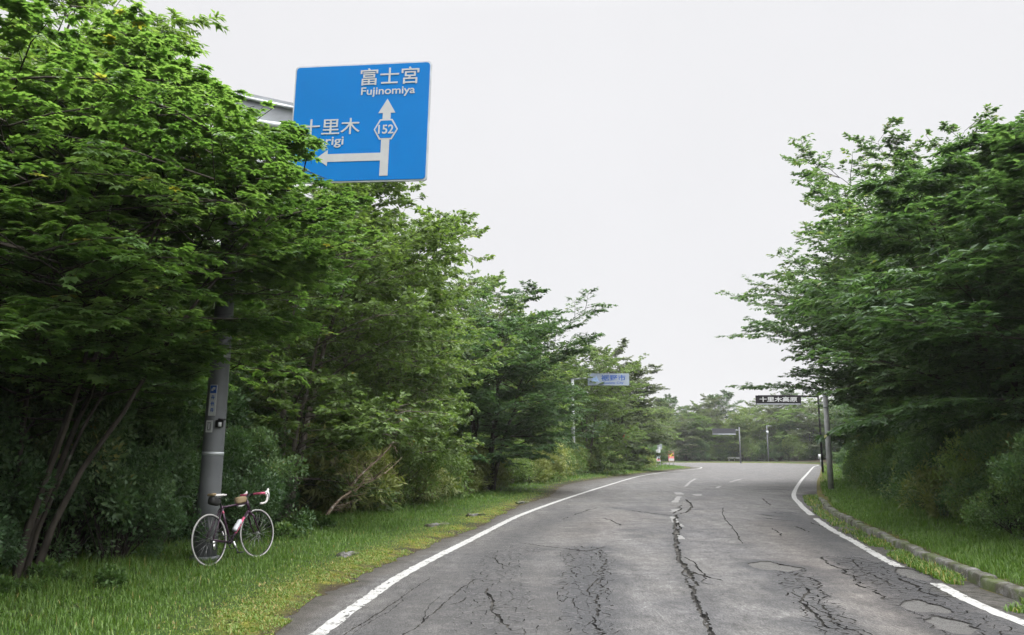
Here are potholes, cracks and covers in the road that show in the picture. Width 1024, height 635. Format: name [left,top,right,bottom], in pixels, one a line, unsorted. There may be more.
crack [343,543,655,635]
crack [563,499,748,635]
crack [760,499,825,535]
crack [772,556,1024,635]
